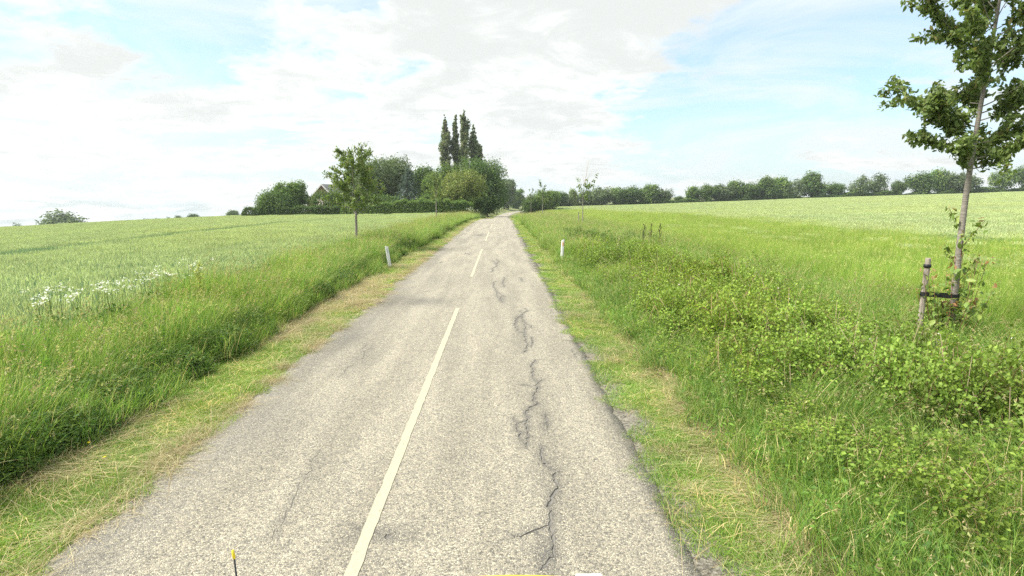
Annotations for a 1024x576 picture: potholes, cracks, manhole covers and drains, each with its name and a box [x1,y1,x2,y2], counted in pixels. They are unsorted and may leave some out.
crack [272,453,318,539]
crack [492,262,559,571]
